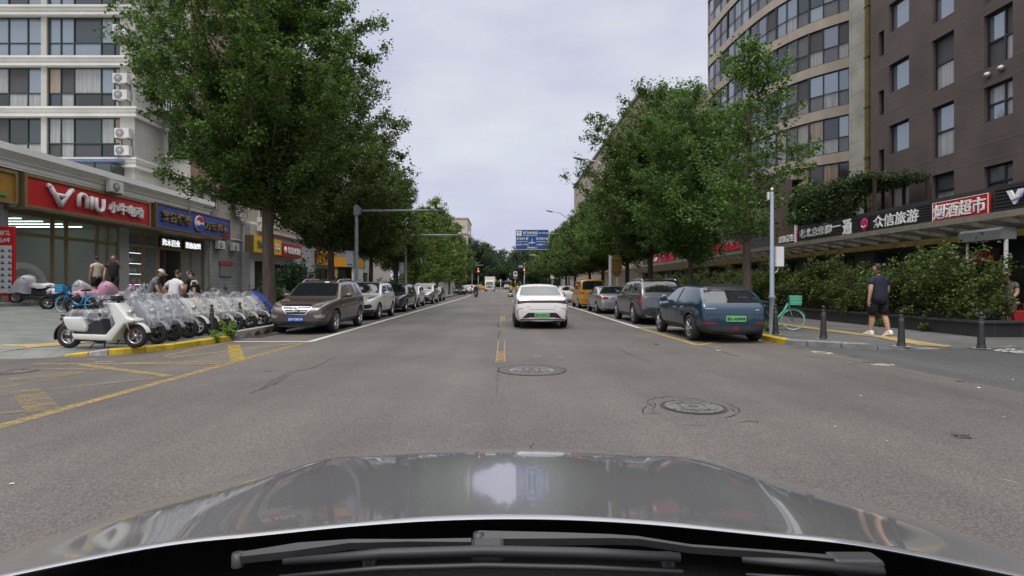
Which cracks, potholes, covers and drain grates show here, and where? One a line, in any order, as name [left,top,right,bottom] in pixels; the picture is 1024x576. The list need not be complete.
manhole cover [660,400,728,415]
manhole cover [497,365,566,376]
crack [249,357,334,394]
